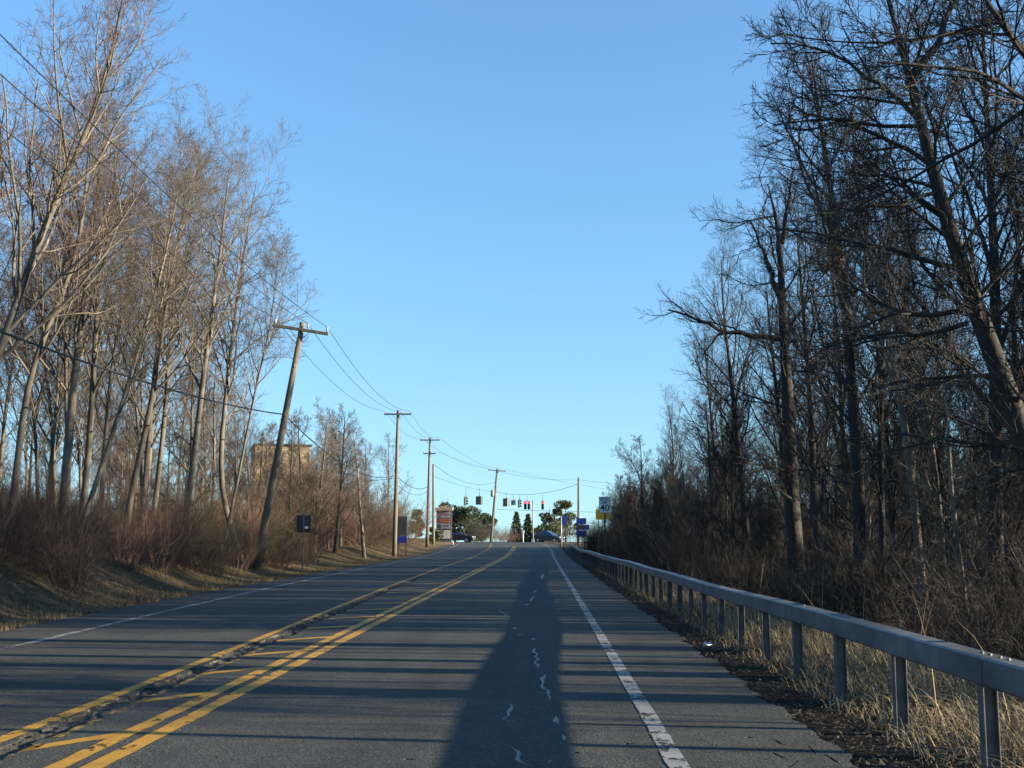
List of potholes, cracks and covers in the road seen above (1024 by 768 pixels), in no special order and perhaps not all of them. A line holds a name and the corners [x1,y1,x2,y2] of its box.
crack [772,739,841,768]
